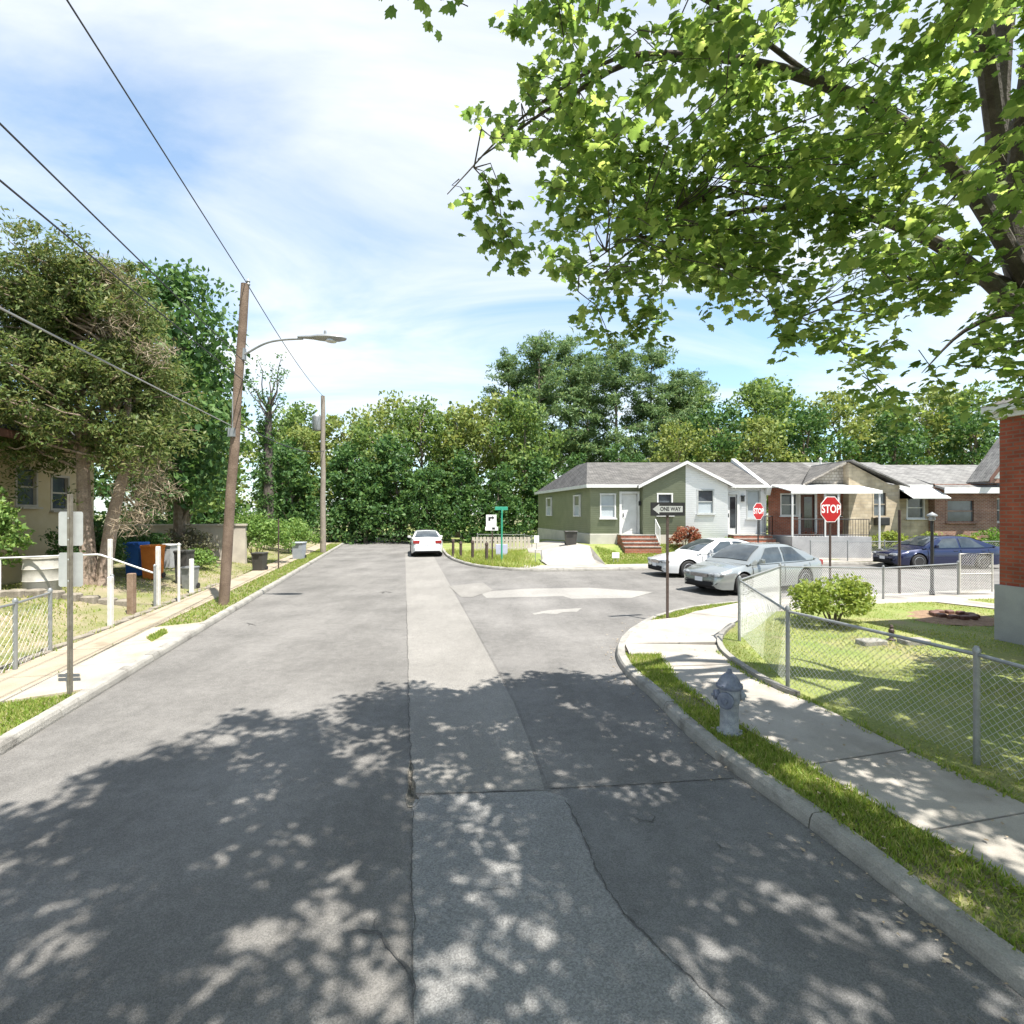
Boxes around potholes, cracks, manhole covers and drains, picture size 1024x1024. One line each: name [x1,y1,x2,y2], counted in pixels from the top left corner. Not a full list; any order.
crack [421,778,733,1012]
pothole [405,760,418,807]
